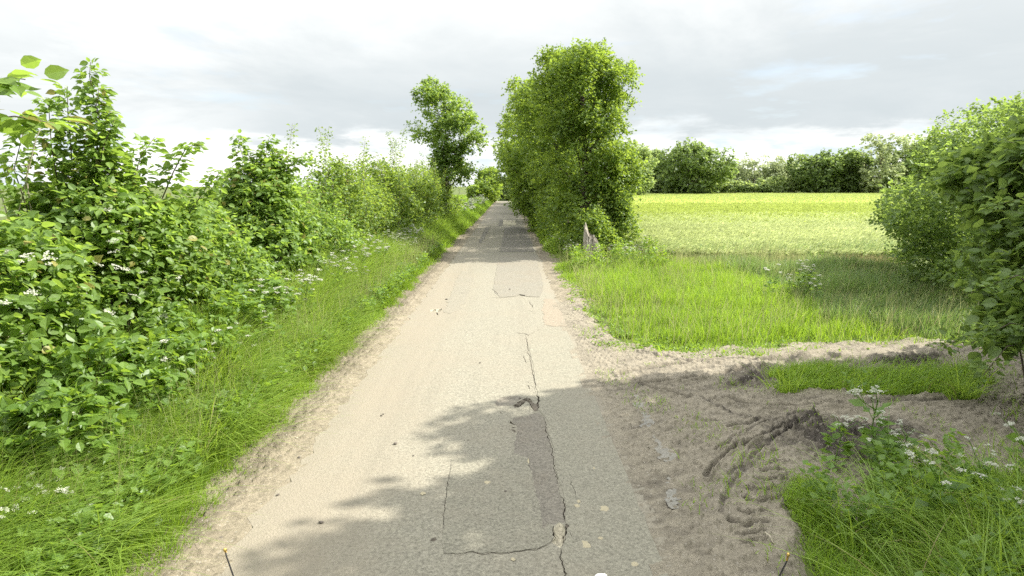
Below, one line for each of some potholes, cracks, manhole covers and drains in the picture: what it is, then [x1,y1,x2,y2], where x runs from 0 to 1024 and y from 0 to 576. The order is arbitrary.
crack [473,482,576,576]
crack [506,326,550,428]
pothole [513,398,538,411]
